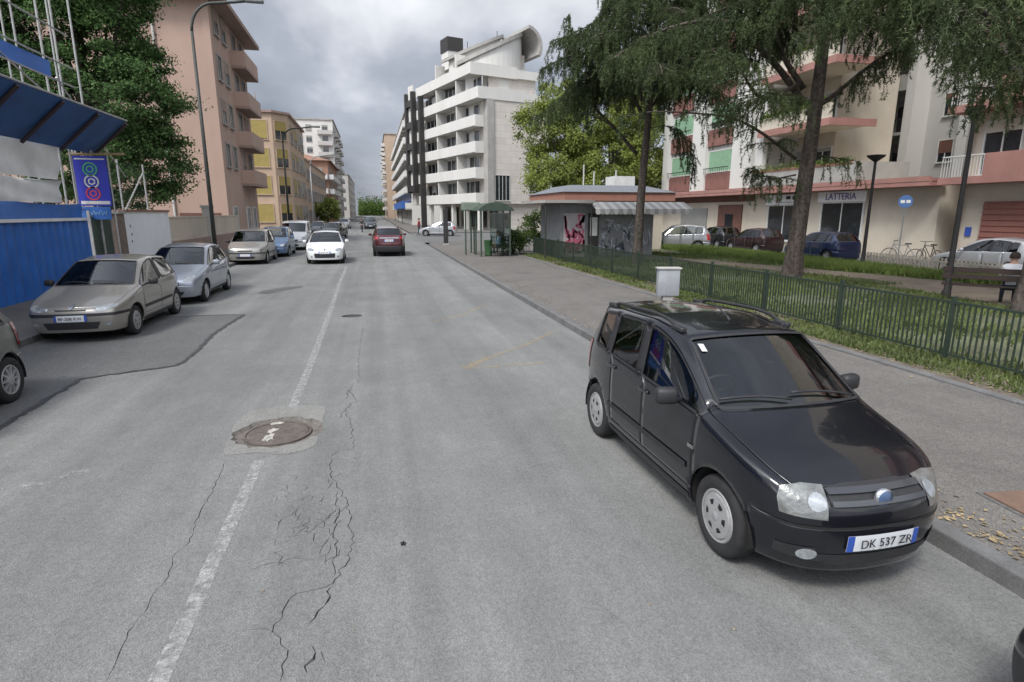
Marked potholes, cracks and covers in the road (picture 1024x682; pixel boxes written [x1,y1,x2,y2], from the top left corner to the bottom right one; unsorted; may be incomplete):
crack [248,461,355,680]
crack [333,329,364,455]
manhole cover [224,405,325,455]
crack [107,464,224,680]
